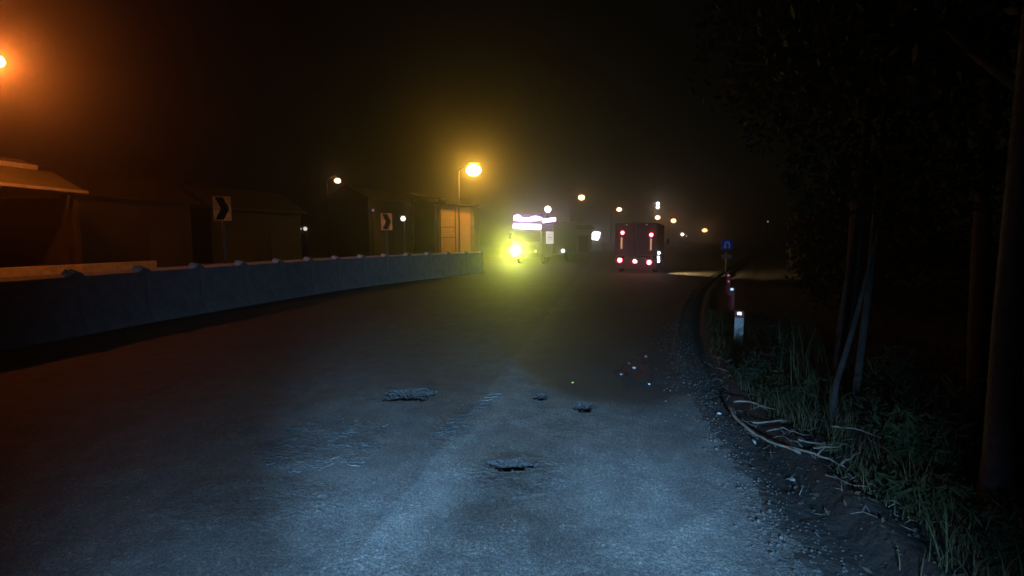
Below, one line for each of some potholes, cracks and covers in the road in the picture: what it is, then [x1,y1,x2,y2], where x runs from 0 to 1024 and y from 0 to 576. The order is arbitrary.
pothole [532,392,548,402]
crack [264,415,392,473]
pothole [379,386,444,401]
pothole [483,457,542,472]
pothole [571,401,597,413]
